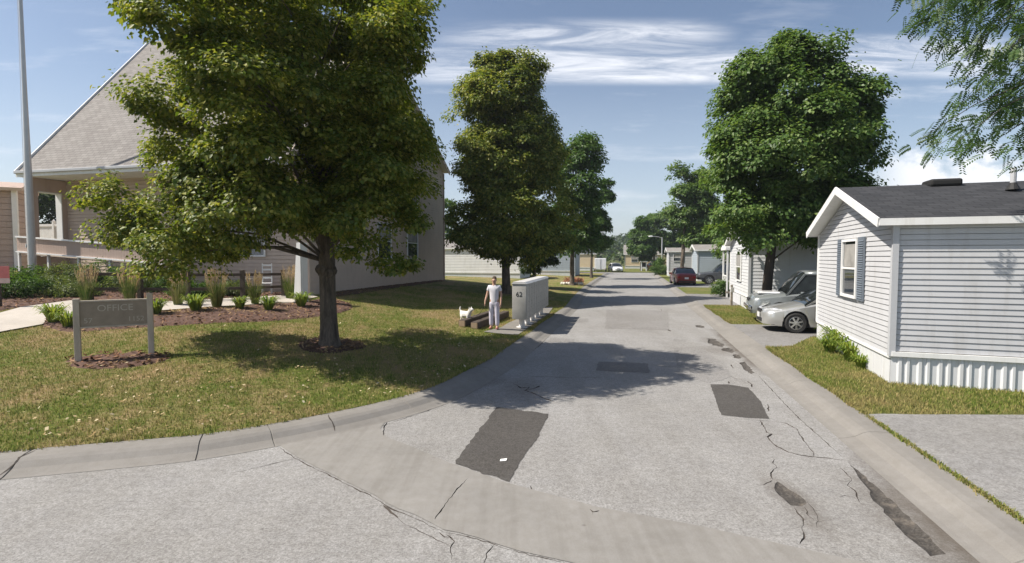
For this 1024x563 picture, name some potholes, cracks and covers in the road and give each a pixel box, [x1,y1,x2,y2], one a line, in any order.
crack [795,503,818,544]
pothole [774,482,806,506]
crack [728,365,864,505]
pothole [849,463,945,556]
